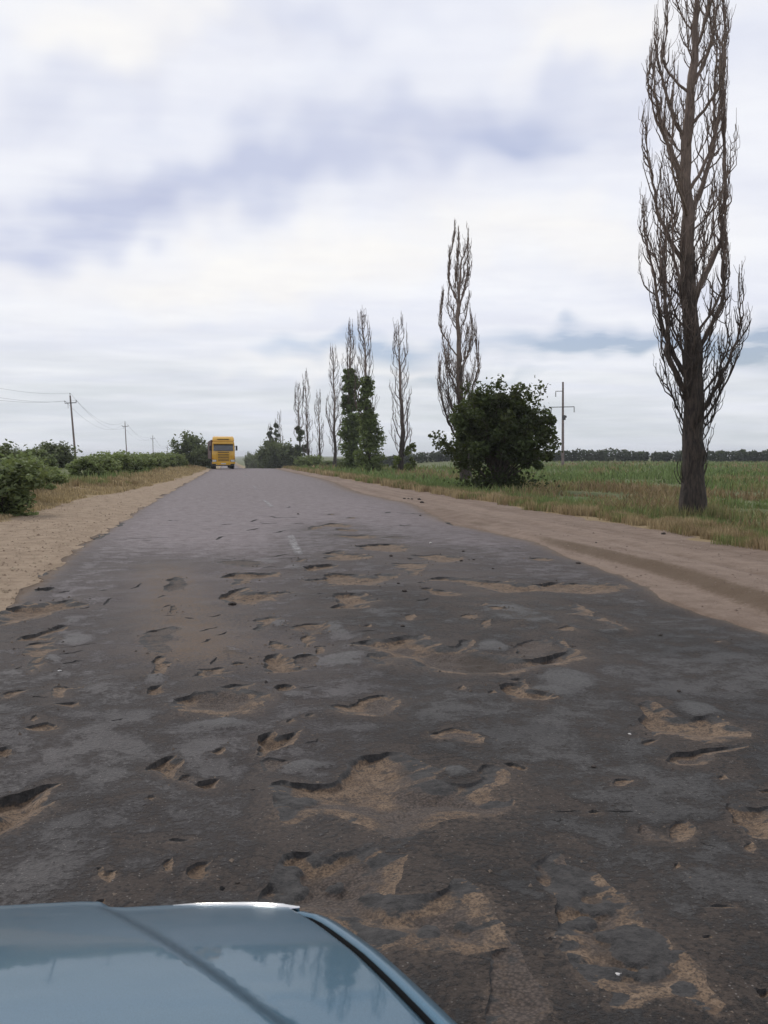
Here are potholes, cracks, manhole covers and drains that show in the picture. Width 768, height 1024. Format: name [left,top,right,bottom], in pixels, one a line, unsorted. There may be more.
pothole [178,774,194,784]
pothole [669,820,696,842]
pothole [145,755,185,778]
pothole [329,593,379,609]
pothole [530,852,726,1016]
pothole [194,778,221,789]
pothole [499,678,558,700]
pothole [218,587,293,605]
pothole [665,745,749,765]
pothole [254,847,512,955]
pothole [743,841,757,853]
pothole [725,803,768,839]
